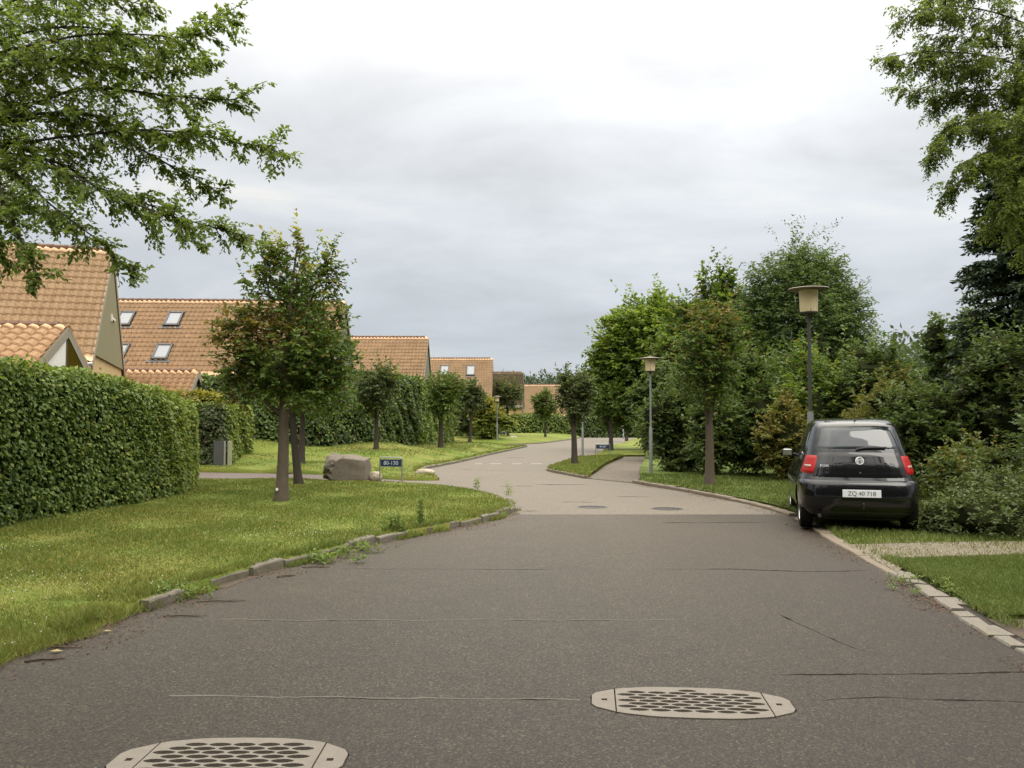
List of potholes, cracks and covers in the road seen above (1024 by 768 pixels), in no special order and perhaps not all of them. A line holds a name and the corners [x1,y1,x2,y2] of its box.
manhole cover [106,738,349,768]
crack [781,615,880,654]
manhole cover [591,687,796,720]
